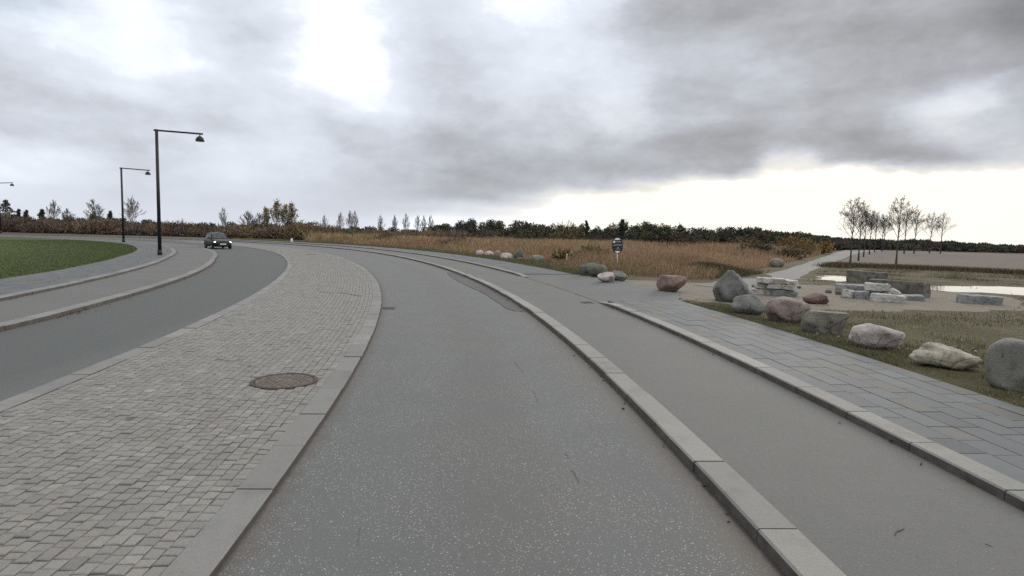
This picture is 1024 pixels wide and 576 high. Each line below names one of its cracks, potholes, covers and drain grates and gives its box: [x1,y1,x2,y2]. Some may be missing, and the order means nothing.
manhole cover [250,373,318,390]
